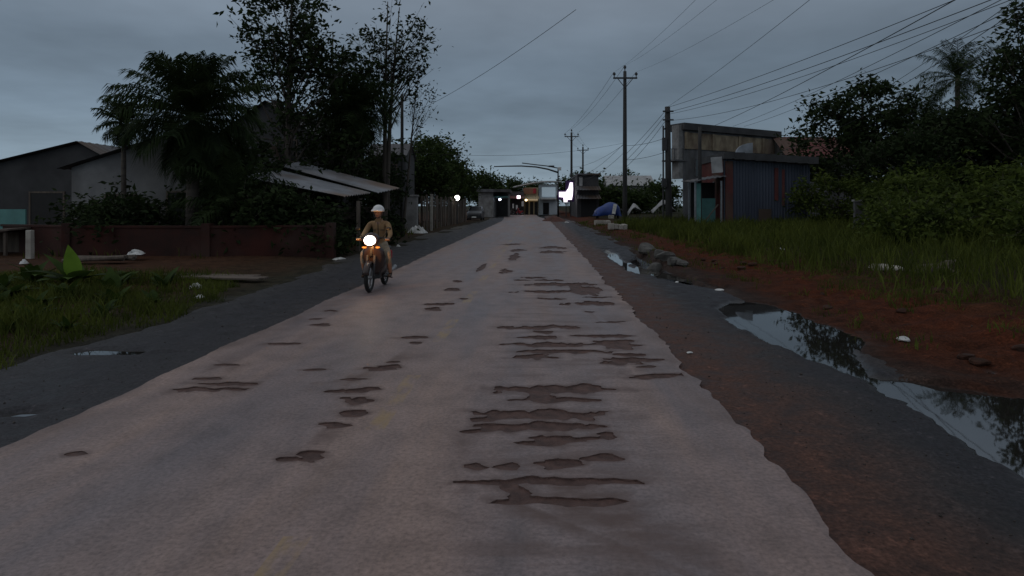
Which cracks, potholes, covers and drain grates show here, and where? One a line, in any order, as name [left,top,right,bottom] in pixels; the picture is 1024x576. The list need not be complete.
pothole [453,476,645,507]
pothole [464,463,490,471]
pothole [493,383,616,404]
pothole [470,408,608,422]
pothole [600,357,665,366]
pothole [492,462,520,471]
pothole [499,340,642,350]
pothole [513,432,617,447]
pothole [512,349,613,360]
pothole [579,453,625,462]
pothole [460,421,608,434]
pothole [276,450,325,463]
